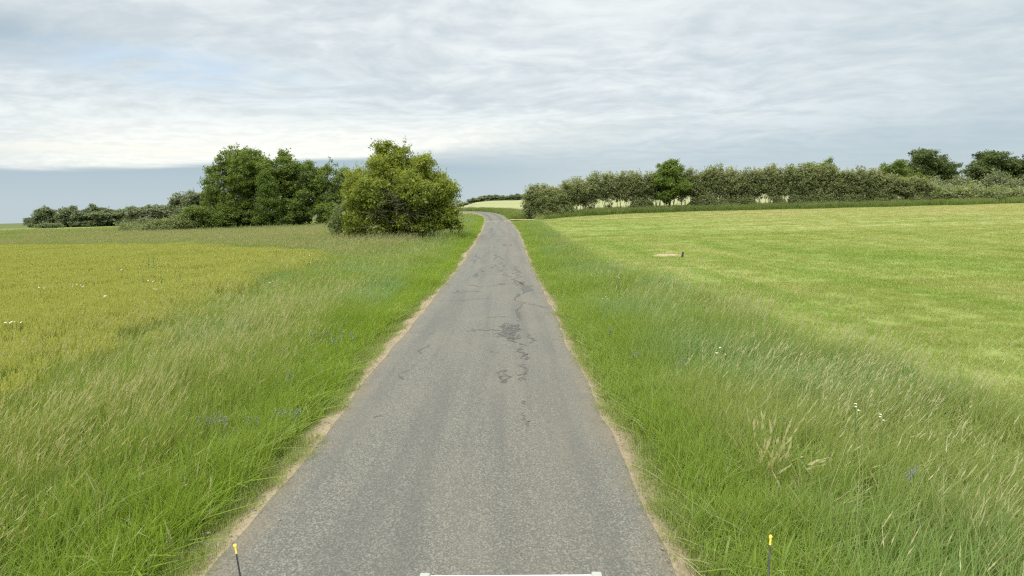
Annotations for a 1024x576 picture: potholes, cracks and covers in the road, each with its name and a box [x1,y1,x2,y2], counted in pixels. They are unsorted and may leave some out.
crack [447,229,542,383]
